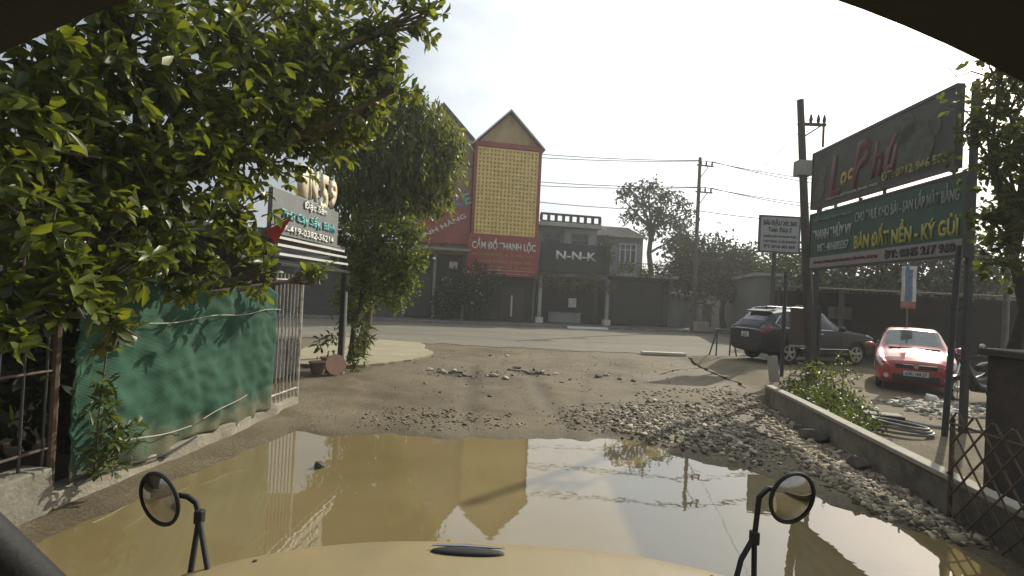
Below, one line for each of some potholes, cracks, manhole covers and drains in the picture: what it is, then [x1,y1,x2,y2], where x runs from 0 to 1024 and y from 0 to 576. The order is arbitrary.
crack [659,357,745,388]
